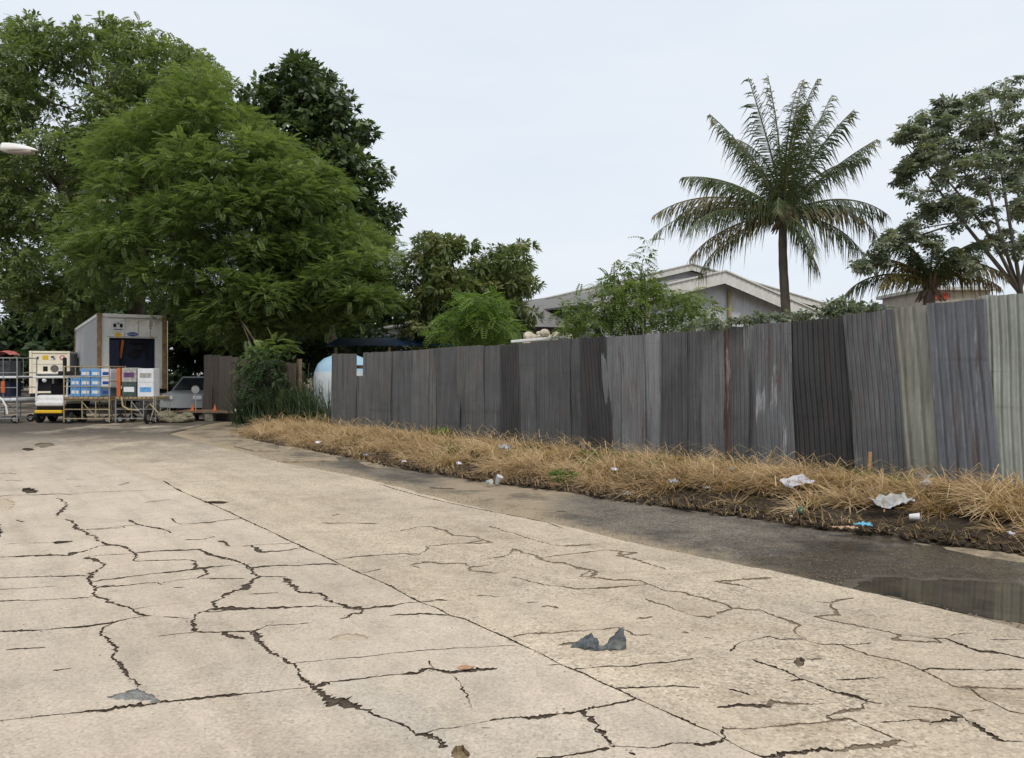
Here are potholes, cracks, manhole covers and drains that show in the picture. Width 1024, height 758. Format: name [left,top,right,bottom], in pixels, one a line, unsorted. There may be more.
pothole [106,688,160,703]
crack [0,473,1024,758]
